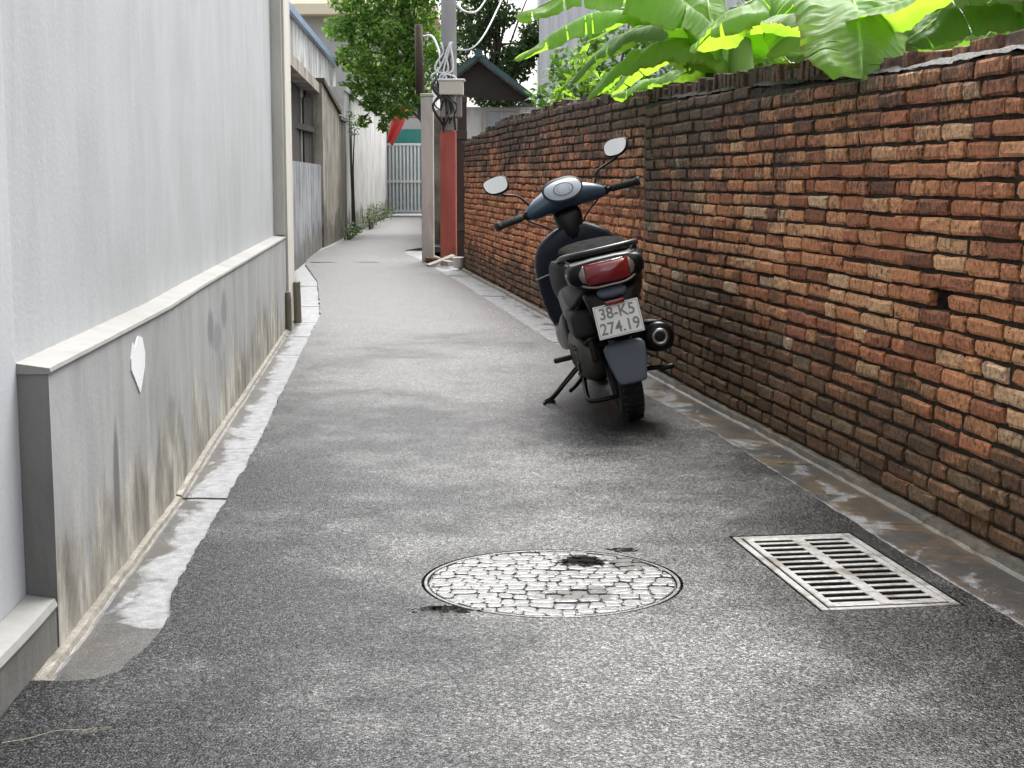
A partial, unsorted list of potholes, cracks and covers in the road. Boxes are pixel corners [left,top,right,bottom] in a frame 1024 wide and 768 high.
manhole cover [424,550,681,618]
drain grate [732,533,961,611]
